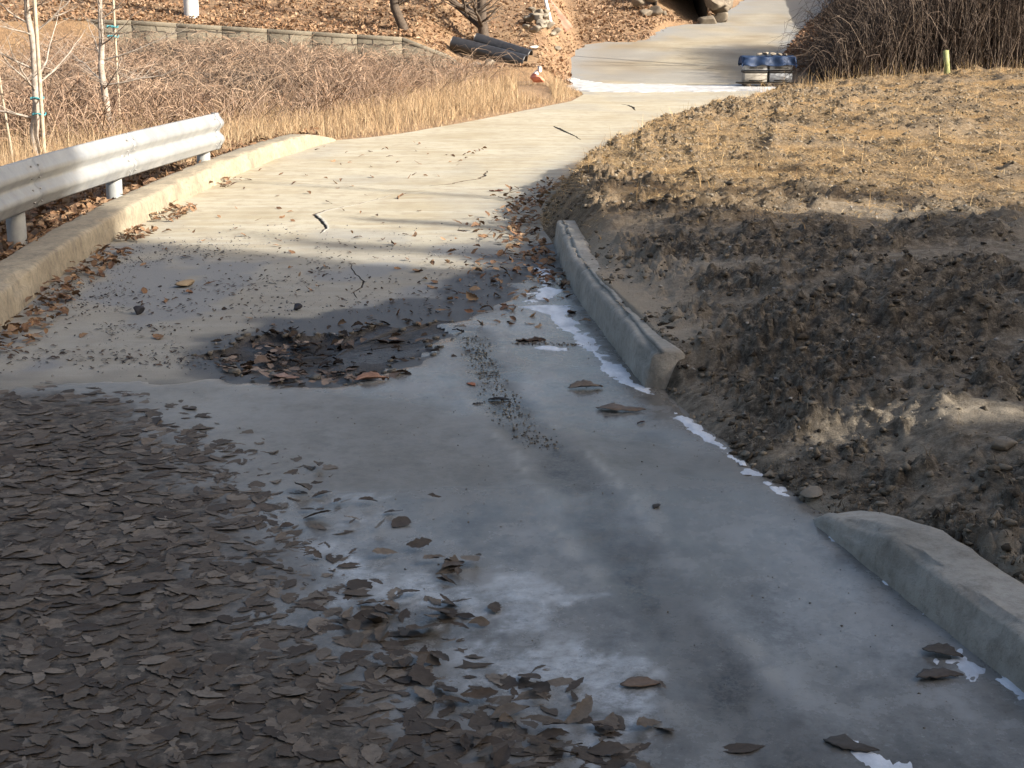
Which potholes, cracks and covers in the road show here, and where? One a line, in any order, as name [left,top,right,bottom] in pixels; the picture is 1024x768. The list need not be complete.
crack [312,195,390,233]
pothole [191,319,464,385]
crack [350,264,364,299]
